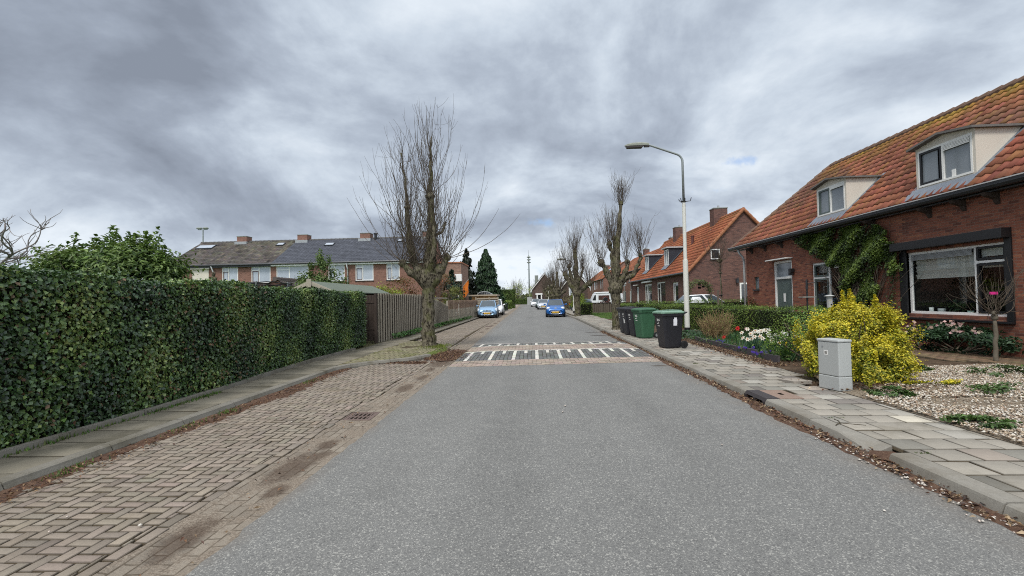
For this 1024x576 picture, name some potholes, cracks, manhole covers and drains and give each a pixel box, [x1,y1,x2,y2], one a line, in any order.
drain grate [744,390,804,404]
drain grate [342,412,380,421]
